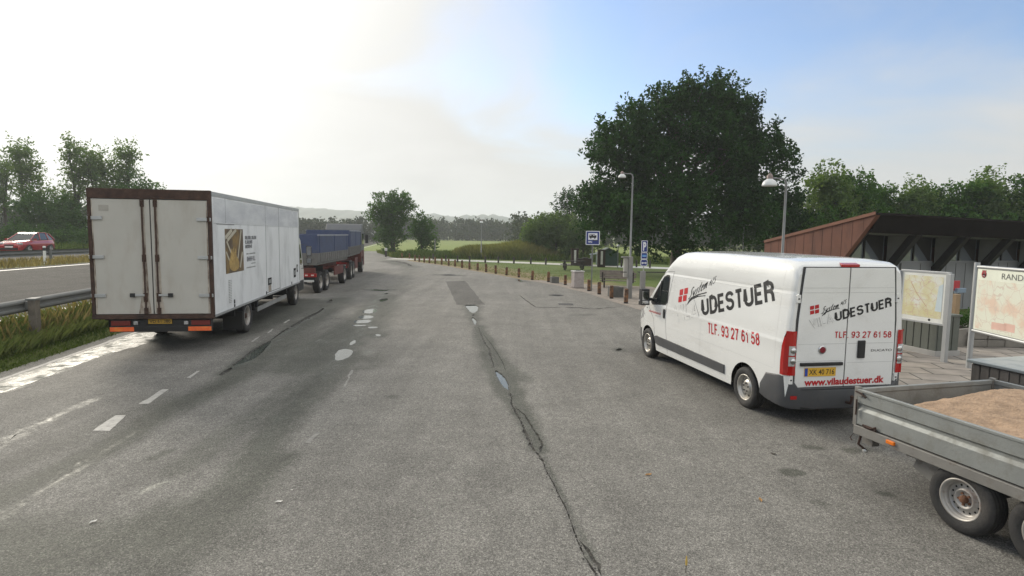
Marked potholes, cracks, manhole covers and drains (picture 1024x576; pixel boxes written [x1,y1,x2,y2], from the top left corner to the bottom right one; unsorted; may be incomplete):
pothole [495,370,510,390]
crack [472,314,506,370]
crack [506,391,603,576]
